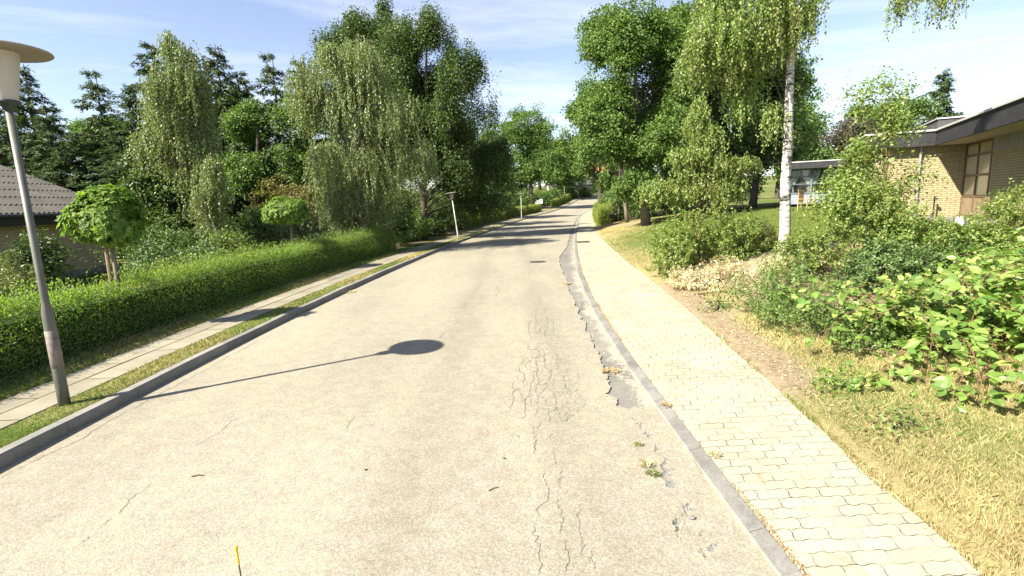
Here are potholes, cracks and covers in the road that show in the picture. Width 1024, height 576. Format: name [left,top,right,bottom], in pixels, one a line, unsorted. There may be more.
pothole [672,518,685,539]
pothole [660,456,679,488]
crack [509,299,595,573]
pothole [677,503,695,517]
